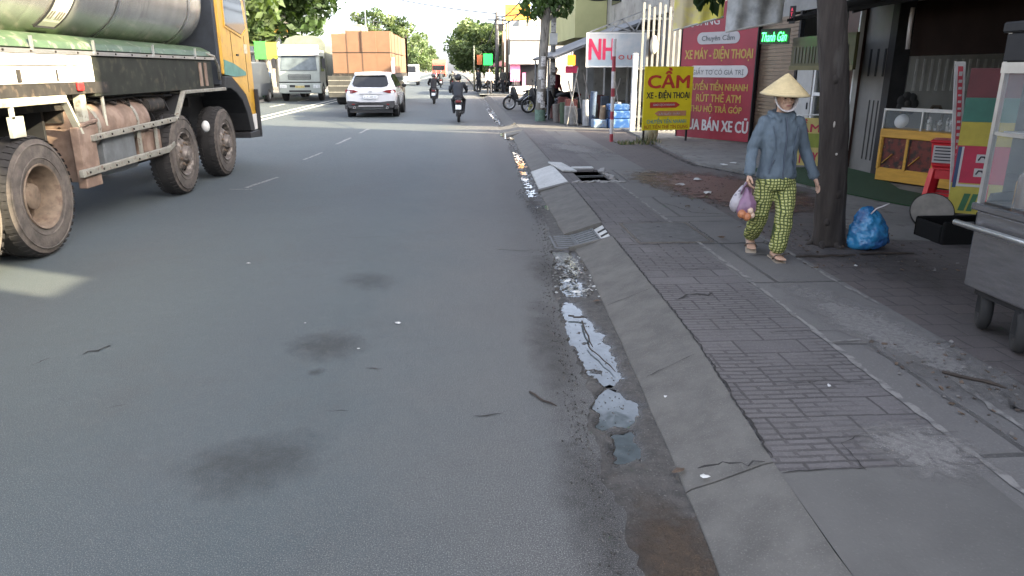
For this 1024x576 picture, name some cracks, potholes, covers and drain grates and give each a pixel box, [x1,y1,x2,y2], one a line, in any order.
drain grate [549,225,610,251]
